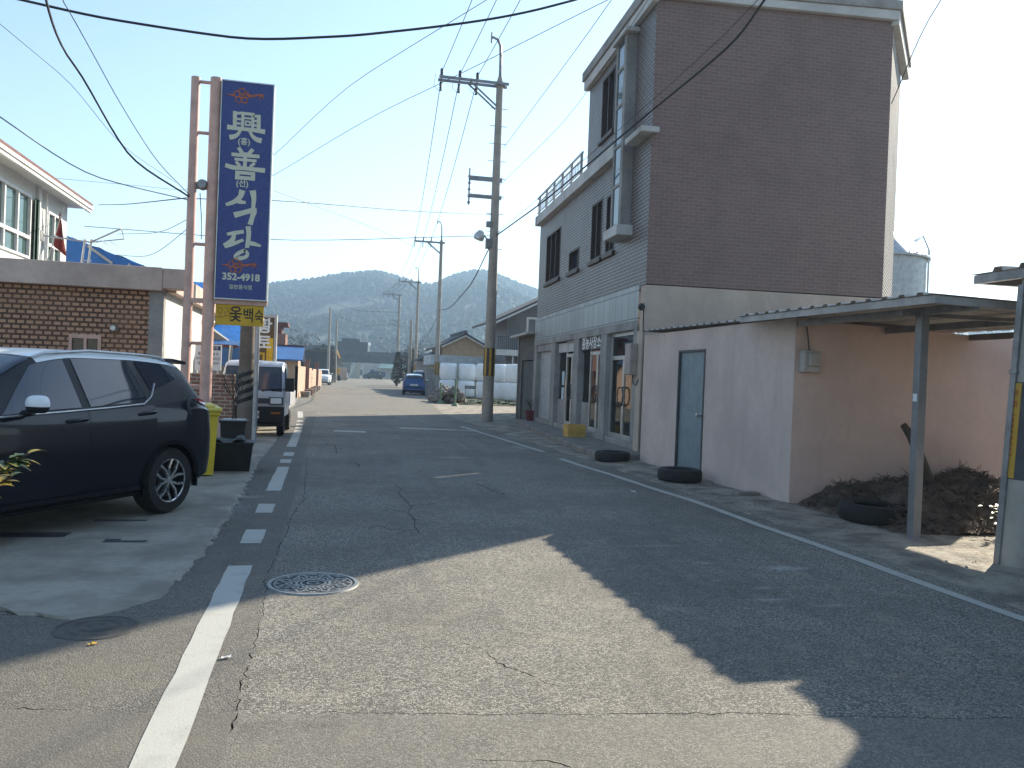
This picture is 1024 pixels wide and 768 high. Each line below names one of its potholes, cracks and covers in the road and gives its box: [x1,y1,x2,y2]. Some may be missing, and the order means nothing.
crack [464,643,557,686]
manhole cover [266,572,359,596]
manhole cover [51,616,140,641]
crack [374,485,431,533]
crack [477,759,573,768]
crack [228,458,308,734]
